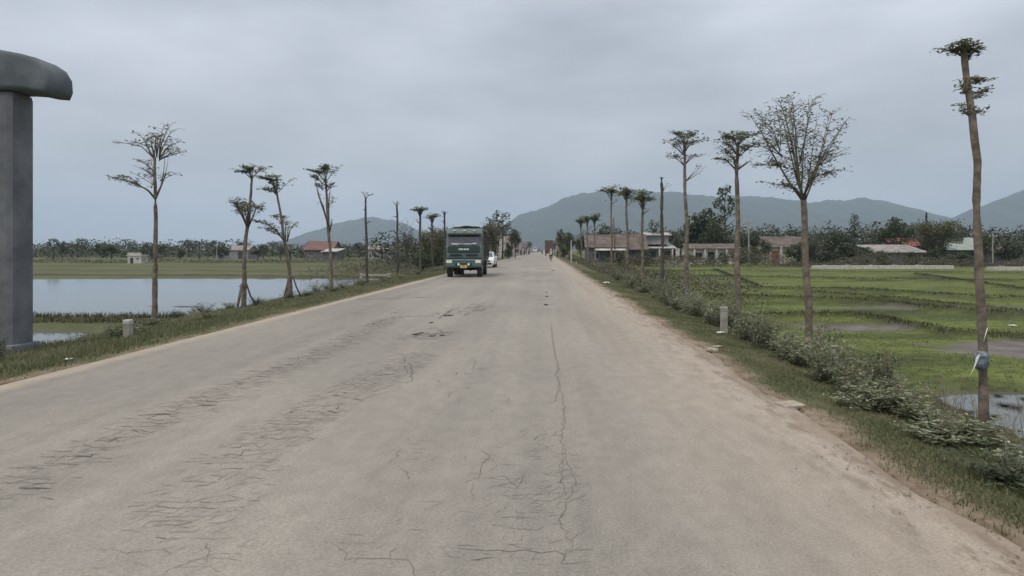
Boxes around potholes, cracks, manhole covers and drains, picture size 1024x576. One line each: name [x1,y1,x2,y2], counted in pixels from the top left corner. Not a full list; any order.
crack [0,297,488,499]
crack [70,352,438,576]
crack [325,325,593,576]
